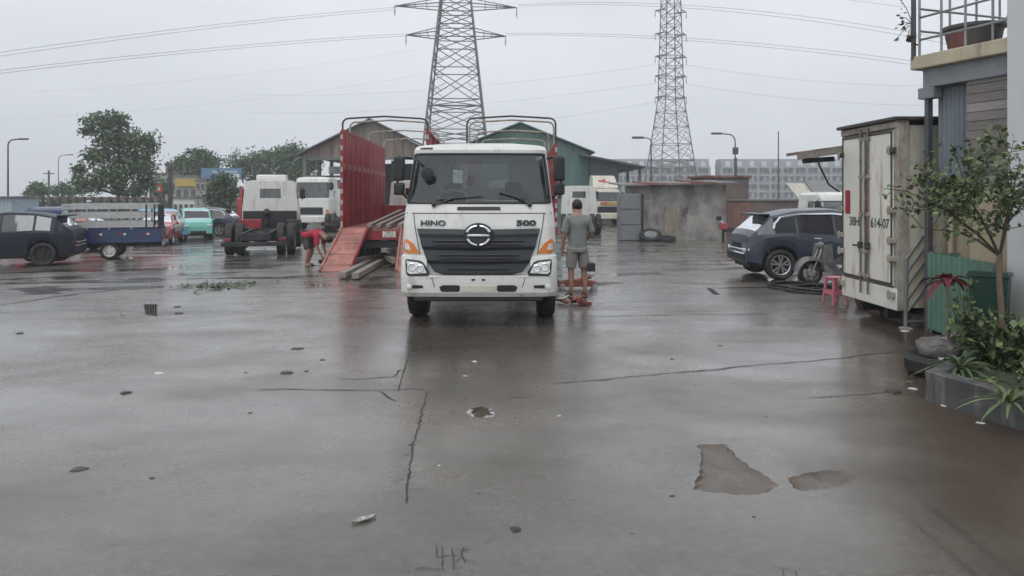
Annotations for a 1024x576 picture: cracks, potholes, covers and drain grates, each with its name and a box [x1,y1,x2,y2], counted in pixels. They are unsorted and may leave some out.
crack [269,318,533,503]
crack [554,350,909,384]
drain grate [144,304,157,316]
pothole [467,407,495,419]
